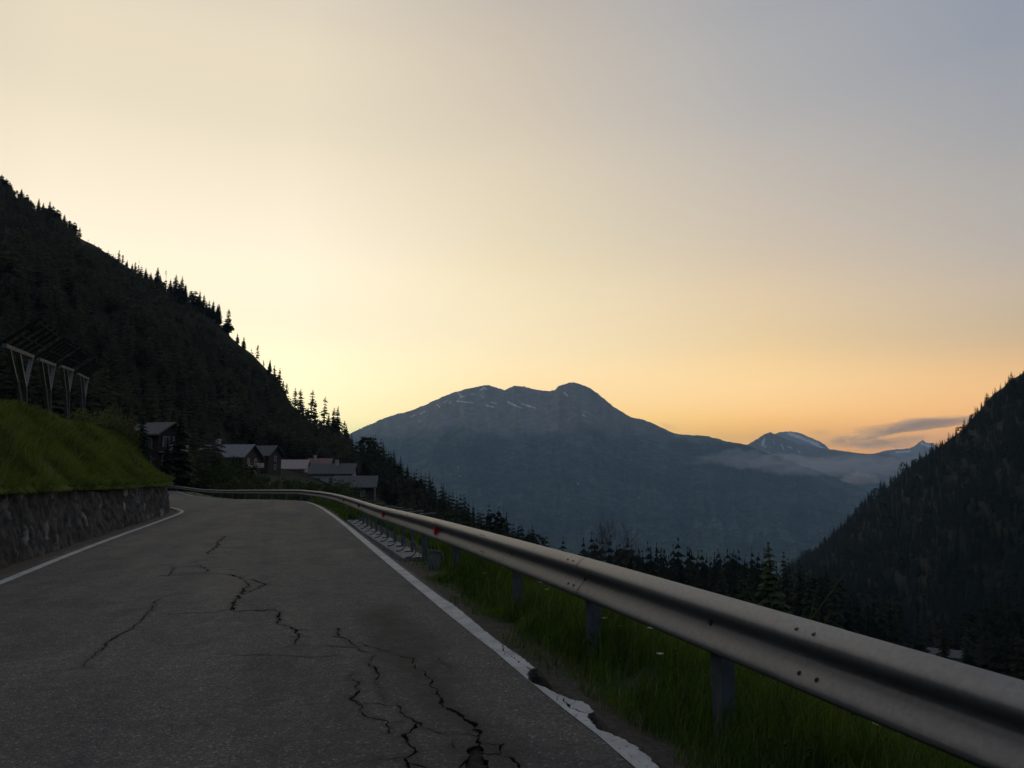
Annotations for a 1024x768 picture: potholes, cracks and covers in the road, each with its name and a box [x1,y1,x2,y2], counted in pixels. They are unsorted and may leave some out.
crack [182,575,520,768]
crack [83,600,158,667]
